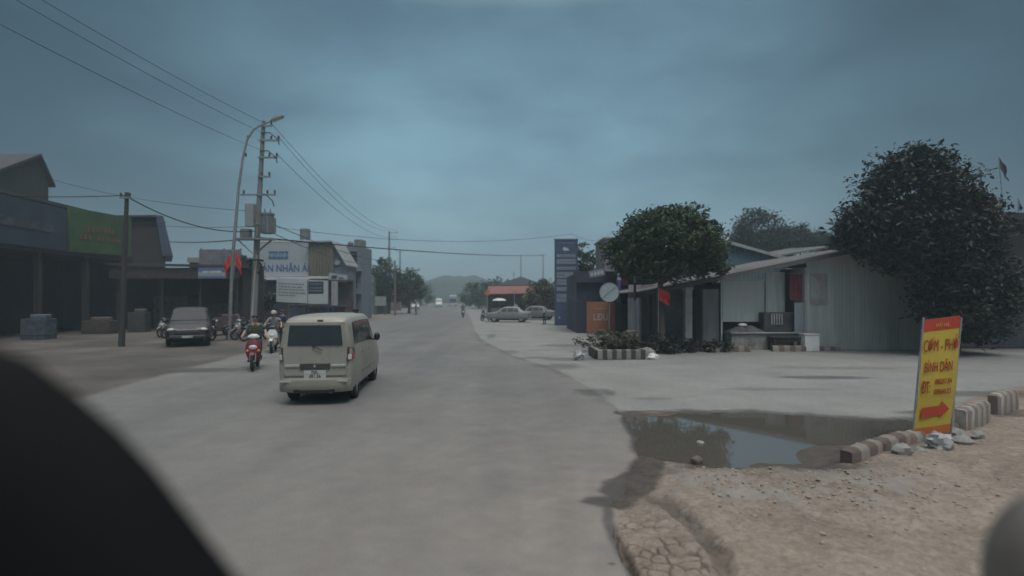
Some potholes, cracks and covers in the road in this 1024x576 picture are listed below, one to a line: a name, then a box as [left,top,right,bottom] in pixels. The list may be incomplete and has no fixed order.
crack [623,518,710,576]
pothole [617,411,913,470]
